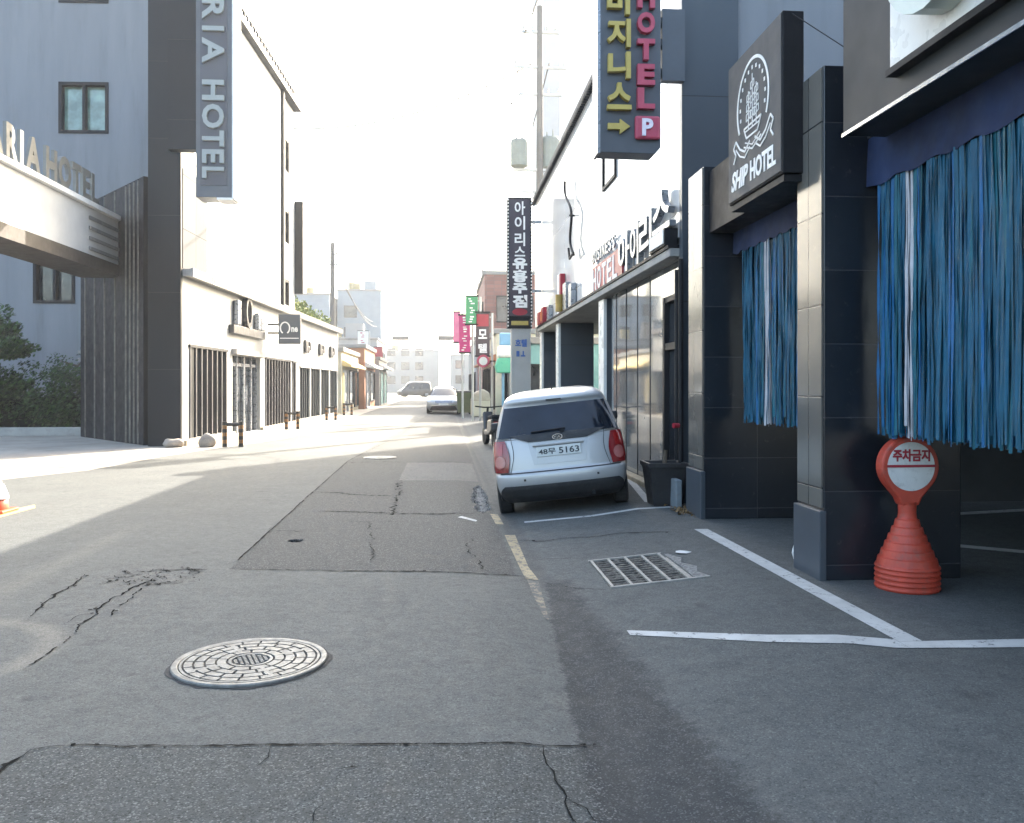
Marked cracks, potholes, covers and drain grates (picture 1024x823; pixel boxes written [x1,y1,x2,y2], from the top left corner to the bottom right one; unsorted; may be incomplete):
drain grate [588,552,710,588]
pothole [470,485,491,513]
crack [334,480,471,562]
crack [29,565,207,665]
manhole cover [164,638,333,689]
